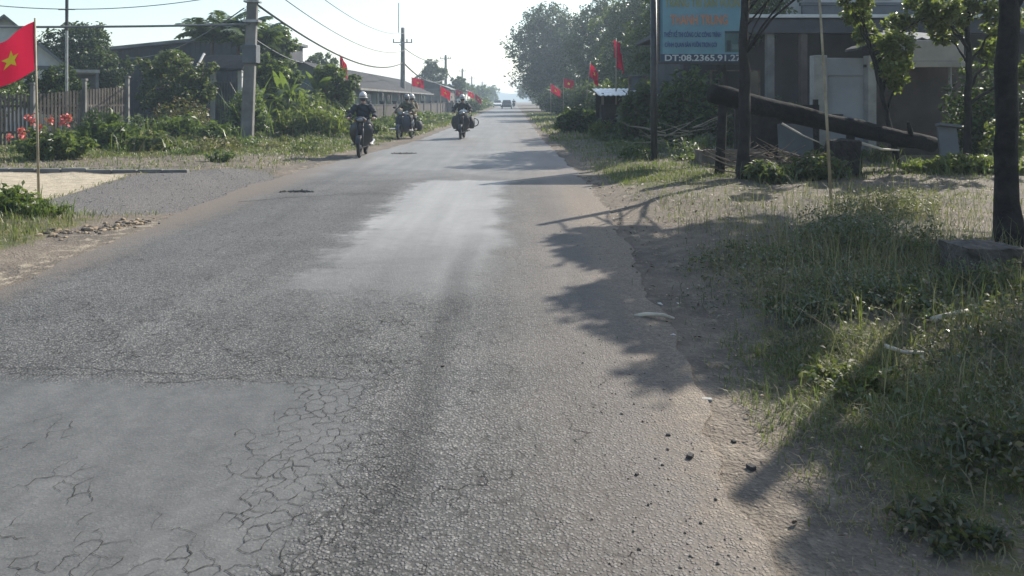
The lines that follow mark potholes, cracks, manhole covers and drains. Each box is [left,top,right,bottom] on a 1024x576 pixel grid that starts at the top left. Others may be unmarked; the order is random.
crack [0,319,454,576]
